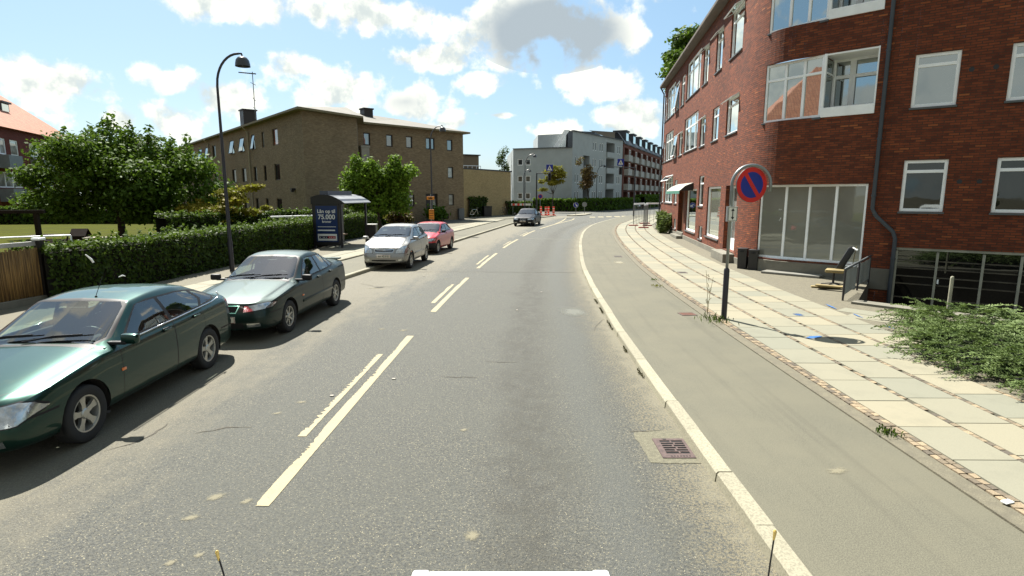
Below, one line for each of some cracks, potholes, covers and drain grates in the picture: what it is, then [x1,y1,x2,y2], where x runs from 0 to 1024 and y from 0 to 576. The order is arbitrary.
drain grate [652,438,696,458]
